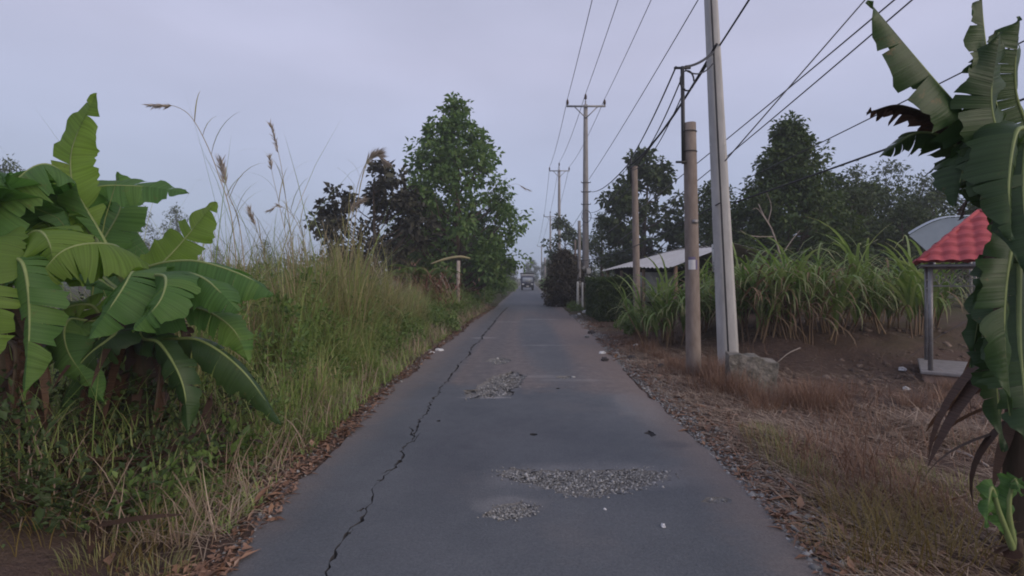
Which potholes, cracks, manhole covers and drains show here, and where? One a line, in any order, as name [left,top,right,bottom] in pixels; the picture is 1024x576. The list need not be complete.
pothole [476,500,543,522]
pothole [463,370,530,400]
pothole [483,466,682,498]
crack [325,307,508,576]
